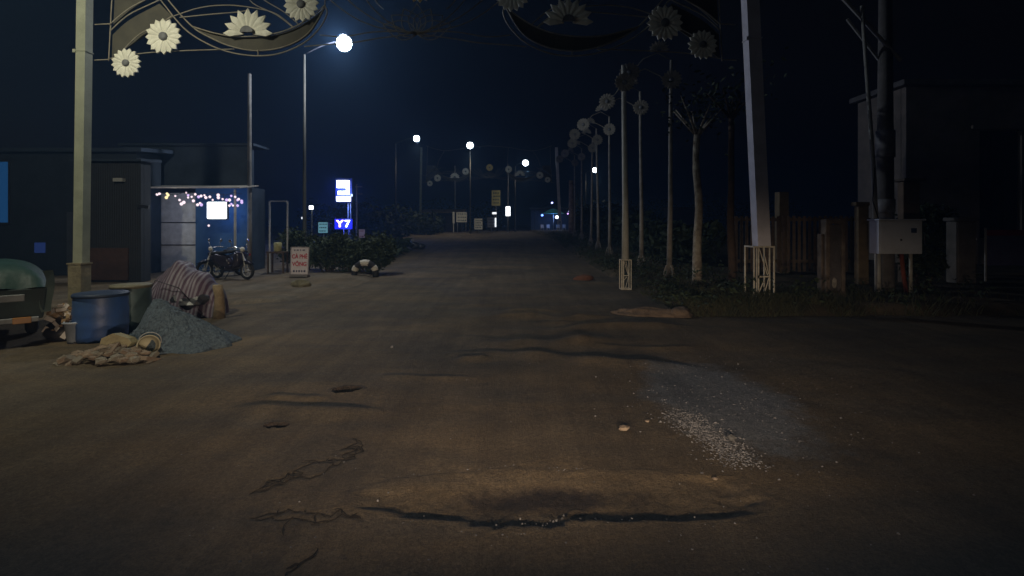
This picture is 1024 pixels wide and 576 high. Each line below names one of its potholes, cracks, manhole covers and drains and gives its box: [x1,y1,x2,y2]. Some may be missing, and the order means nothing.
crack [250,438,364,576]
pothole [327,385,368,395]
pothole [260,420,294,431]
